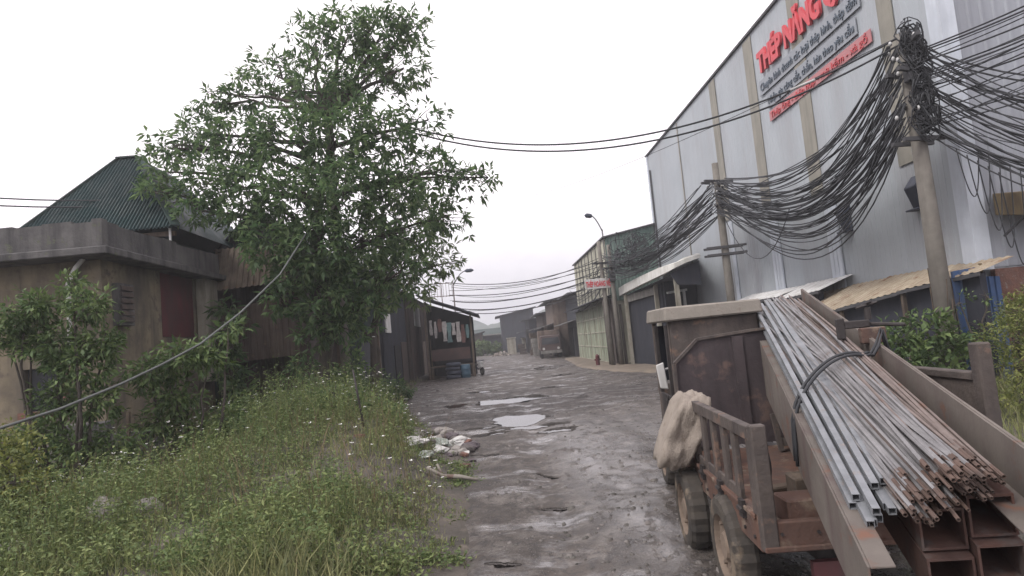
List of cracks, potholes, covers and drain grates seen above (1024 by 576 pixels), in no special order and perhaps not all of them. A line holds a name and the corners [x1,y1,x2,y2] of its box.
pothole [489,413,554,427]
pothole [472,394,553,406]
pothole [536,425,579,434]
